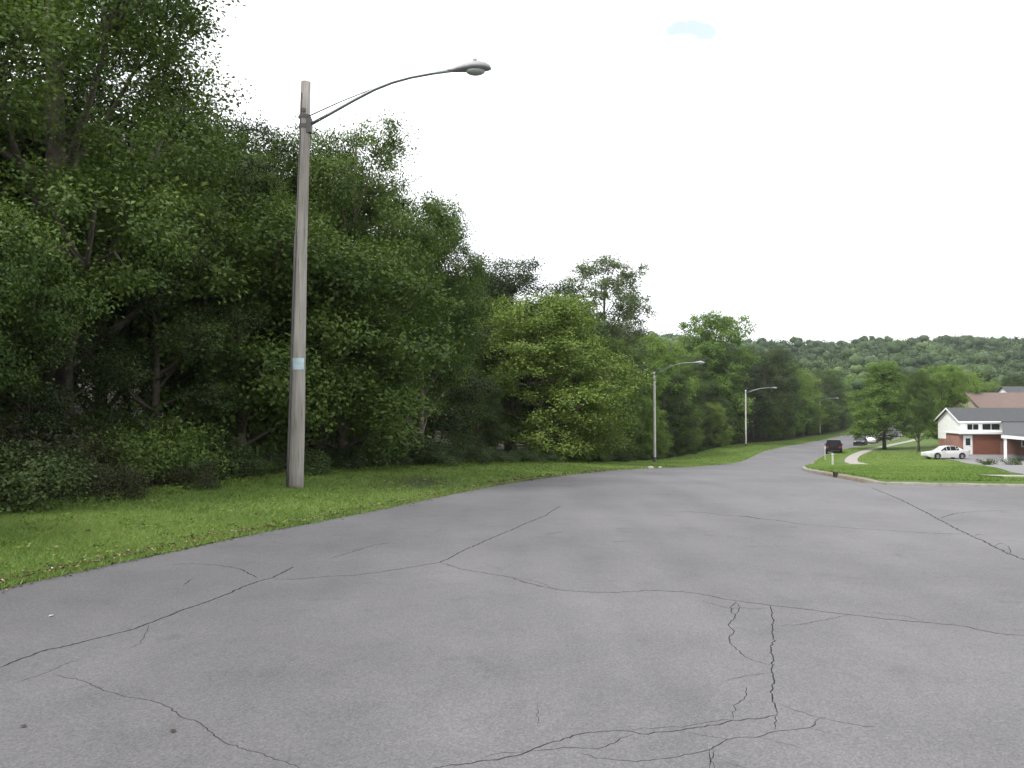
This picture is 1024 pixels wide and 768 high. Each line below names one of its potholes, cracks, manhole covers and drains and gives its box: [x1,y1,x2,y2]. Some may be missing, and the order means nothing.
crack [437,563,1012,768]
crack [689,510,1002,535]
crack [0,506,560,768]
